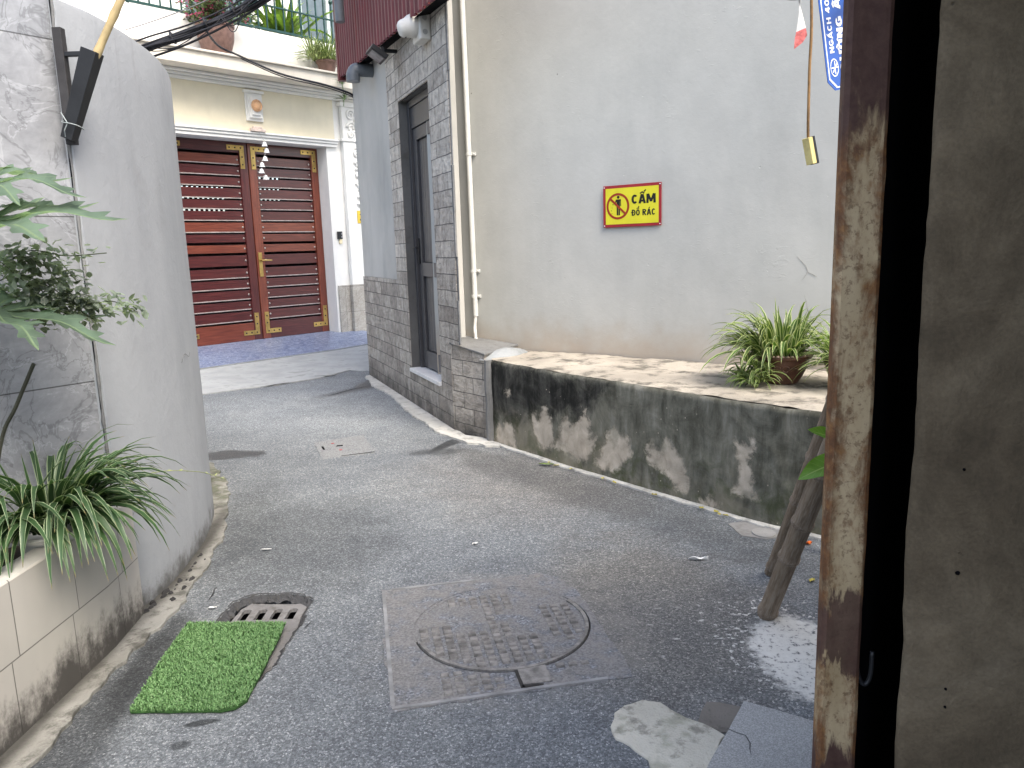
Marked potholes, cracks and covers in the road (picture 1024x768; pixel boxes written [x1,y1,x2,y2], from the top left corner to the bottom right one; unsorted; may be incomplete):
manhole cover [381,573,632,714]
manhole cover [314,435,375,459]
drain grate [216,592,314,682]
